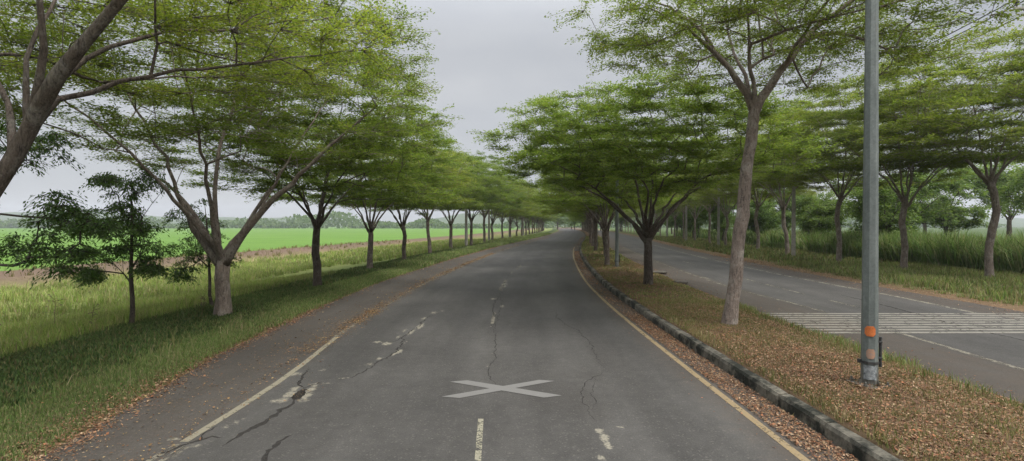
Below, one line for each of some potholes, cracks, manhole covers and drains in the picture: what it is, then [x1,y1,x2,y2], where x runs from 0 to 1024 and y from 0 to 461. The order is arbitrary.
crack [488,279,507,380]
crack [339,315,432,380]
crack [144,370,320,461]
crack [553,309,602,422]
